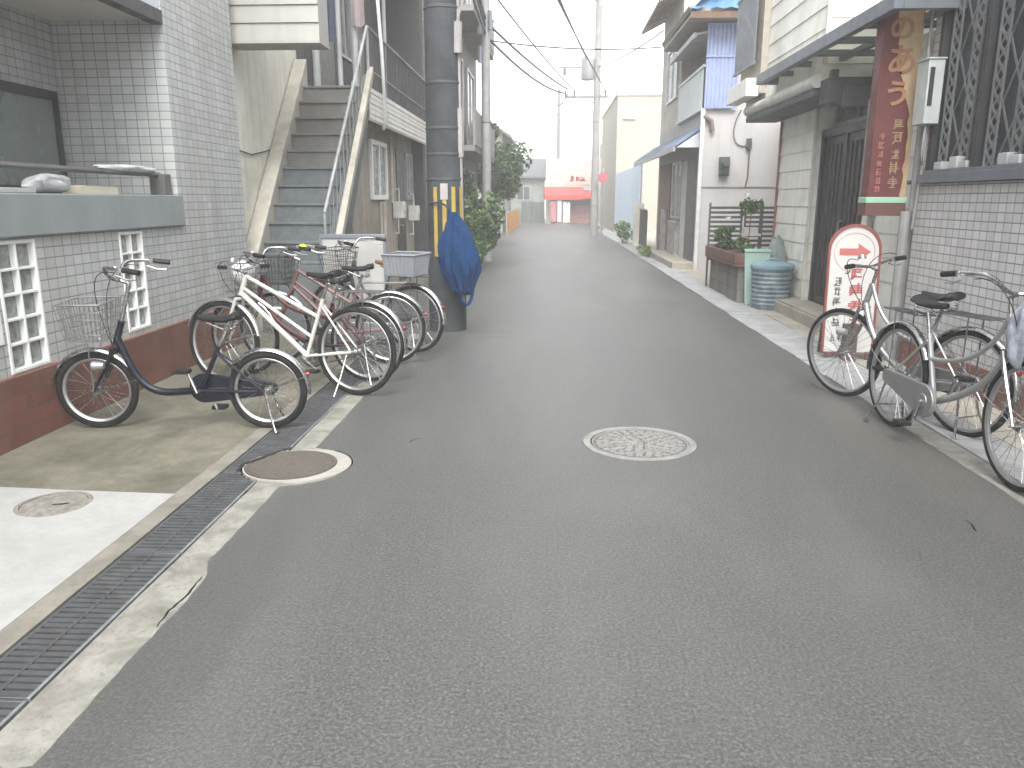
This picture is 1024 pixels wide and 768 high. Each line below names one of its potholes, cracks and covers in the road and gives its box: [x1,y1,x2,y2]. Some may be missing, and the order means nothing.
crack [157,577,202,626]
manhole cover [583,426,697,461]
manhole cover [14,491,93,517]
manhole cover [242,449,352,484]
